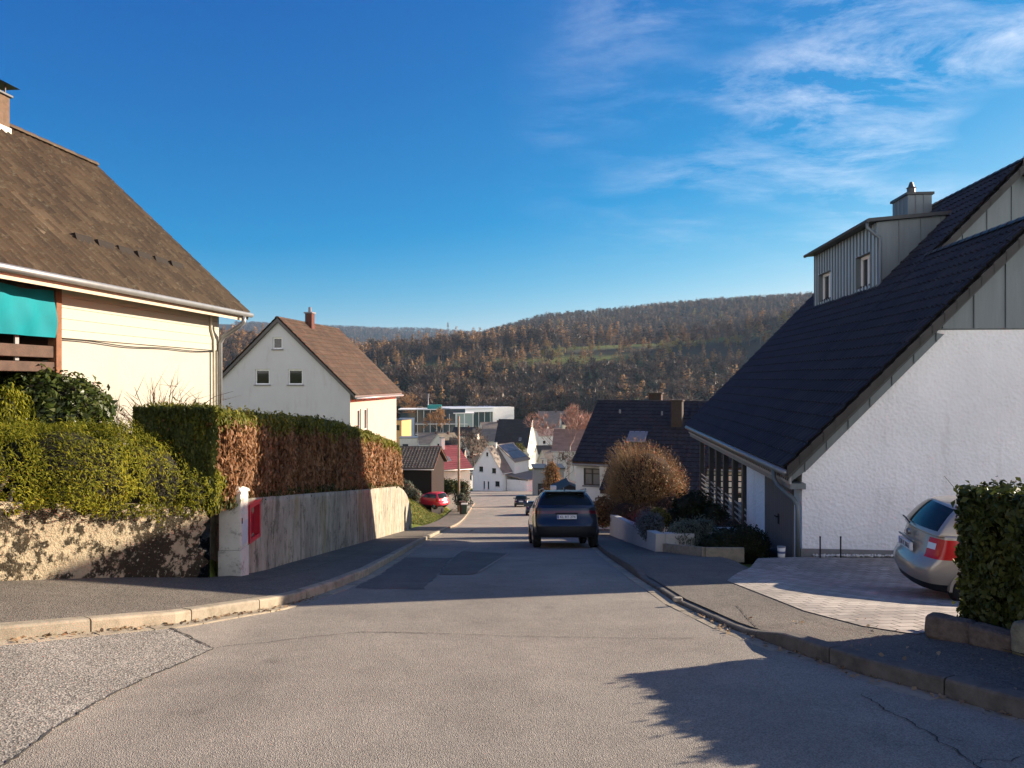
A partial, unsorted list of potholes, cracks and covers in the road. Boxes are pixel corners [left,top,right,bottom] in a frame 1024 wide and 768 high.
crack [861,694,1021,768]
